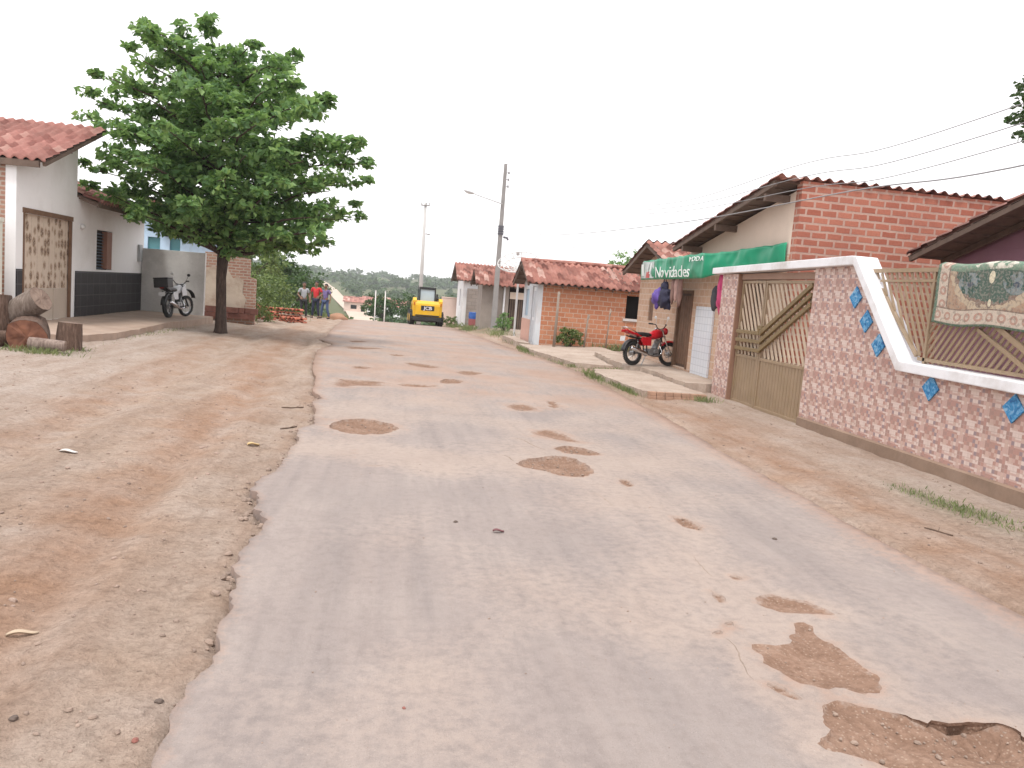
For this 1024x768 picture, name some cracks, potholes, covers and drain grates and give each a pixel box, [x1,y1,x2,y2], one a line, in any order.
pothole [752,622,882,694]
pothole [516,456,594,477]
pothole [755,594,835,615]
pothole [671,516,704,531]
pothole [530,429,580,443]
pothole [330,378,388,387]
pothole [329,419,399,435]
pothole [817,700,1024,768]
pothole [767,682,802,700]
pothole [554,446,600,456]
